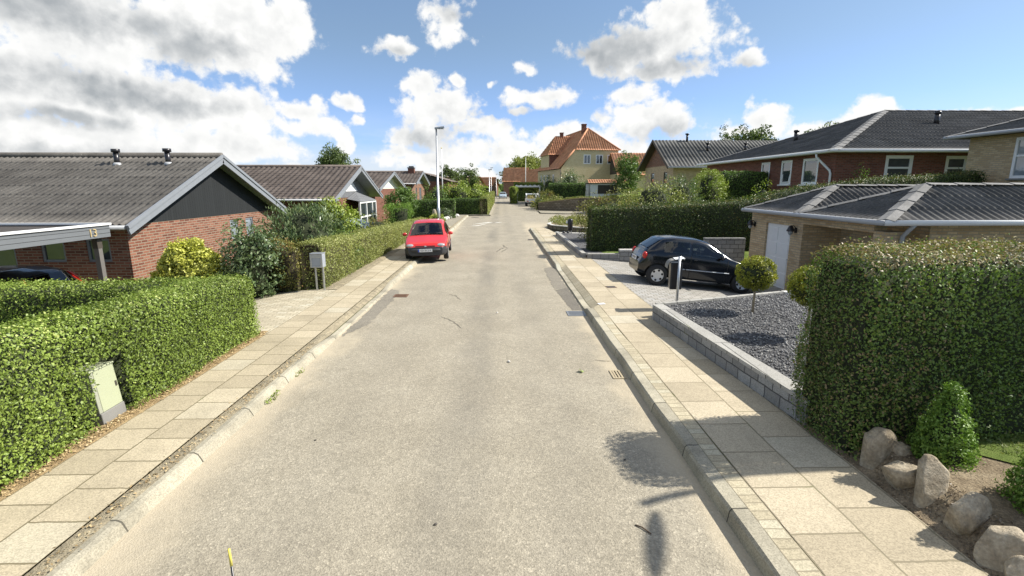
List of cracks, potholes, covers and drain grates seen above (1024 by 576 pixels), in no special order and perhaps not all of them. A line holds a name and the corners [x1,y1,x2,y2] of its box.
drain grate [609,370,627,379]
